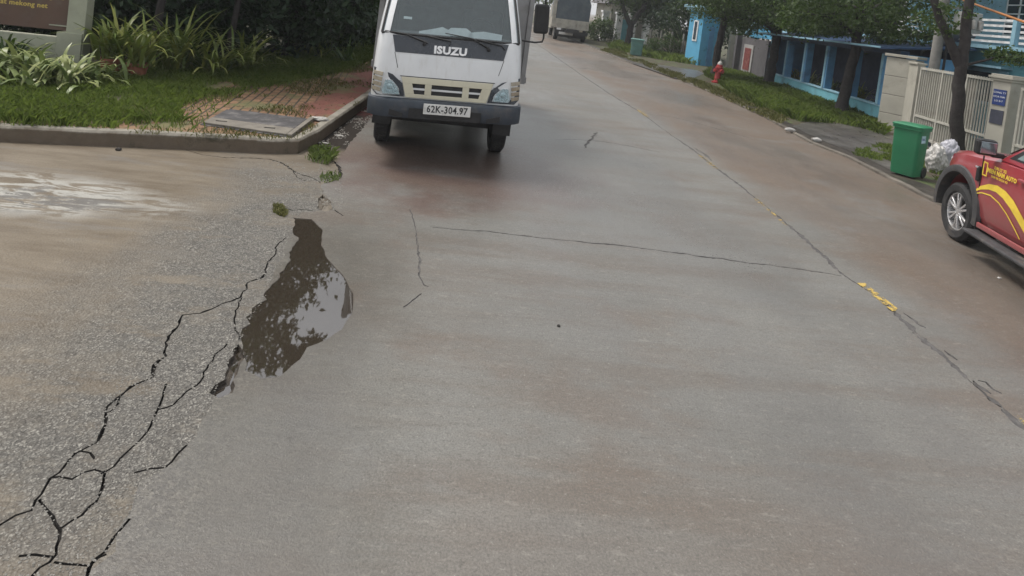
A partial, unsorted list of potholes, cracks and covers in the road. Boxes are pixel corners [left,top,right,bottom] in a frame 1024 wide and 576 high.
crack [187,150,343,216]
crack [436,227,839,276]
crack [403,210,429,307]
manhole cover [200,109,314,138]
pothole [209,344,246,395]
crack [565,133,642,149]
pothole [242,218,353,367]
